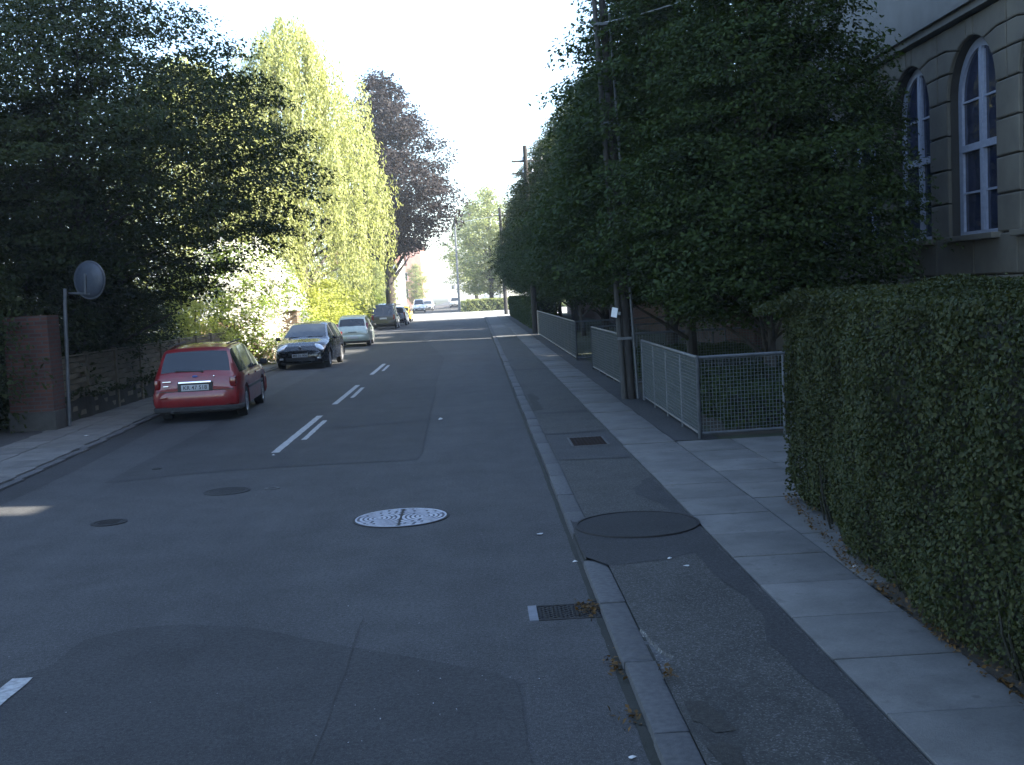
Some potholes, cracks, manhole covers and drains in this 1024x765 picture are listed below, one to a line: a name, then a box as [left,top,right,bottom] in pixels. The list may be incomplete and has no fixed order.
manhole cover [575,511,700,538]
manhole cover [203,487,251,496]
drain grate [527,602,603,622]
manhole cover [90,518,128,527]
manhole cover [352,508,449,528]
